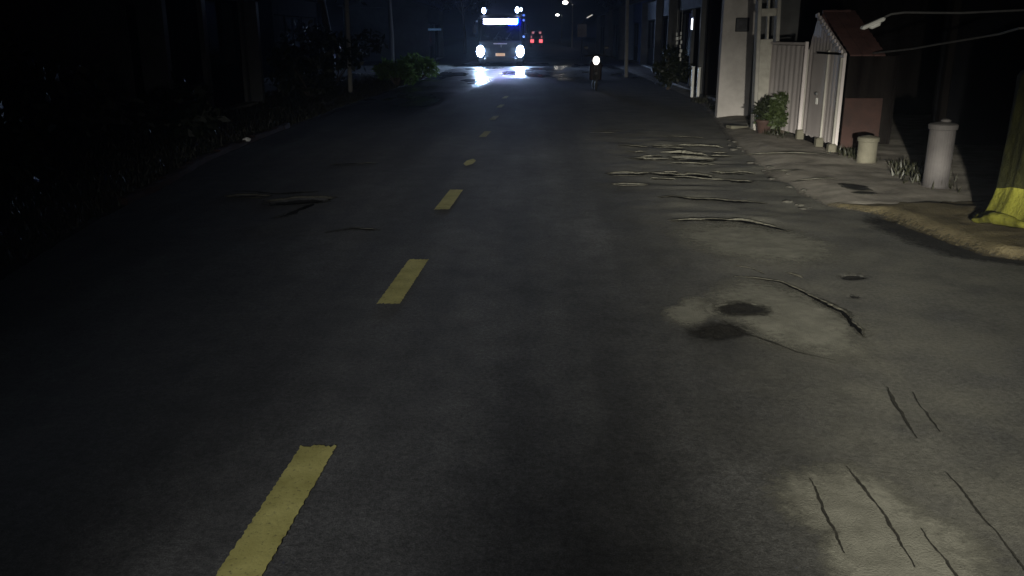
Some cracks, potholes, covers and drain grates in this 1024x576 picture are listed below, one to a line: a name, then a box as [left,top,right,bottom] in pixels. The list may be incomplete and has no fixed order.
crack [809,466,1024,576]
pothole [689,323,748,340]
crack [596,132,835,231]
pothole [716,301,772,316]
crack [246,191,380,233]
crack [887,387,940,438]
crack [724,265,866,361]
